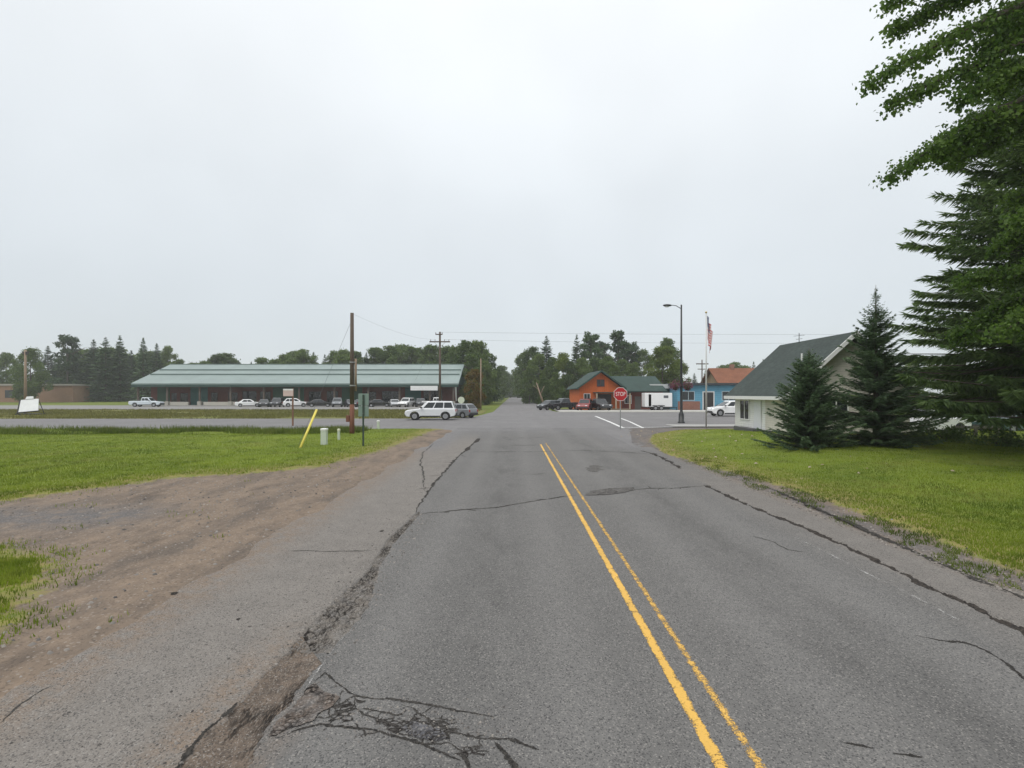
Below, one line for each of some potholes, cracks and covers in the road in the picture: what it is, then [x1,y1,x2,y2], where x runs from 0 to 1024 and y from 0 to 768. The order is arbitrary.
crack [917,635,1024,679]
crack [416,438,573,514]
crack [276,672,539,768]
